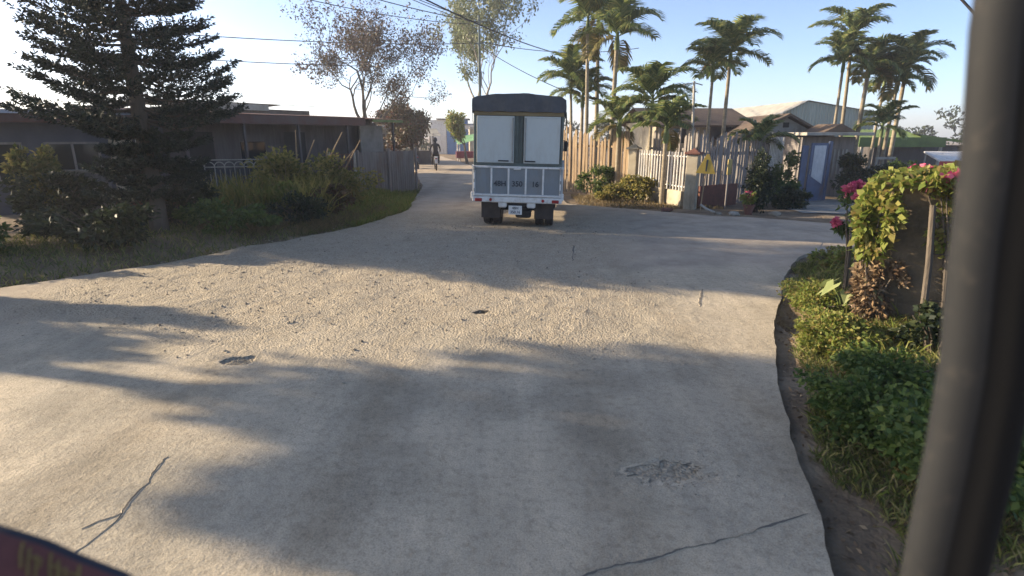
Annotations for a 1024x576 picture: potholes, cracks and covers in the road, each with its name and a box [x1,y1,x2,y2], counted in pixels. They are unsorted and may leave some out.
crack [76,456,169,552]
pothole [213,354,263,368]
crack [583,513,809,576]
pothole [615,457,718,487]
